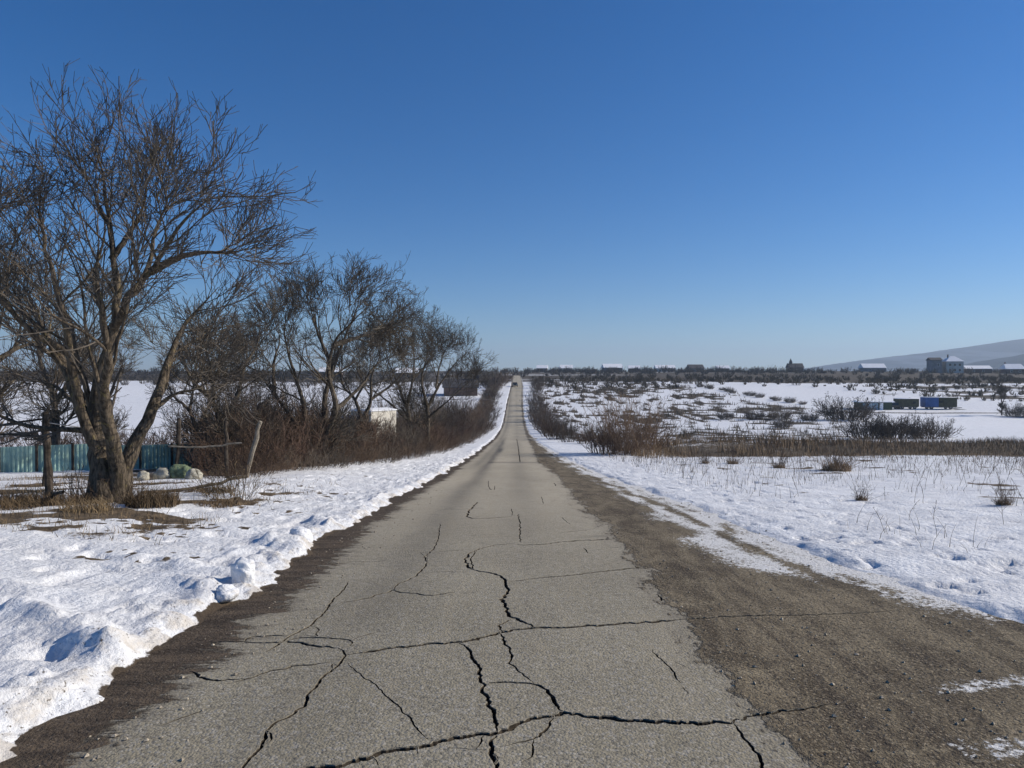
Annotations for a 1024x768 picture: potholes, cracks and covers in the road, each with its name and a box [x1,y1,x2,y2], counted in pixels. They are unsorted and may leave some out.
crack [189,481,895,768]
